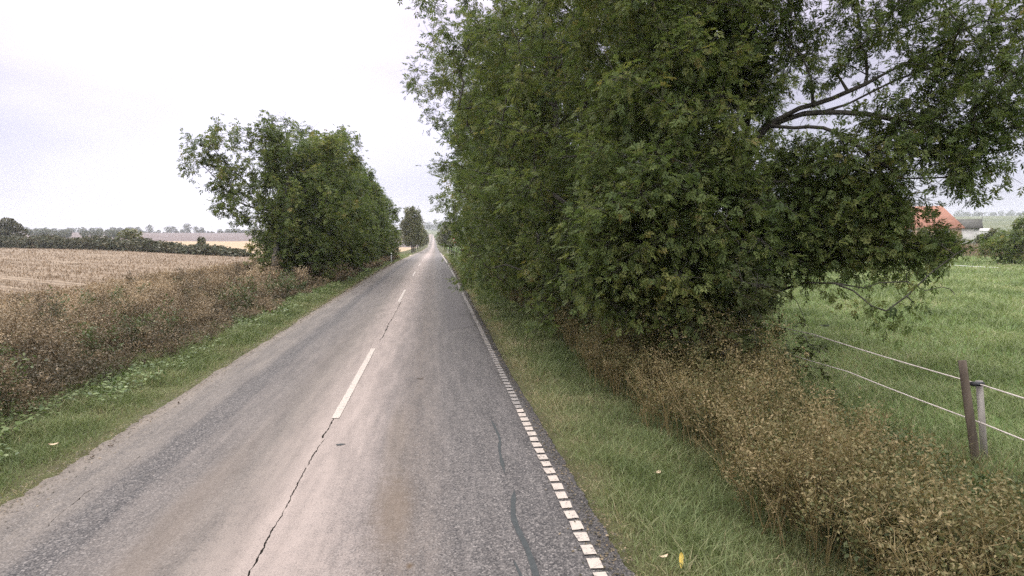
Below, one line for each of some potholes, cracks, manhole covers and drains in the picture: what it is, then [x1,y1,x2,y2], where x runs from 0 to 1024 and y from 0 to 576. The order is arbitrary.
crack [248,418,334,576]
